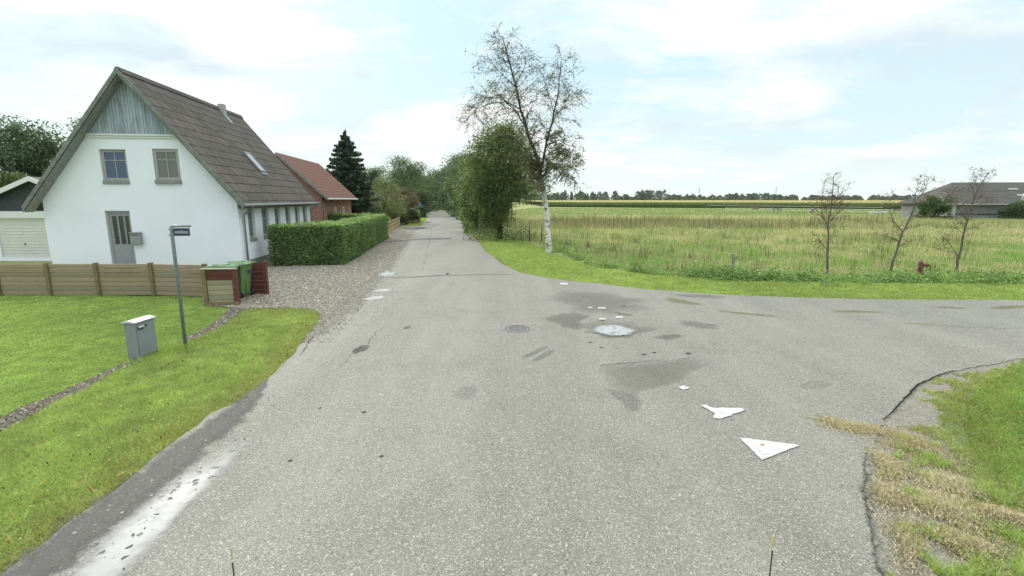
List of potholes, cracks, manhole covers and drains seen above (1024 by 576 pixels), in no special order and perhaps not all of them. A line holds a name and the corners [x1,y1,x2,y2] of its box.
manhole cover [503,324,532,332]
crack [860,452,885,576]
crack [884,370,954,419]
